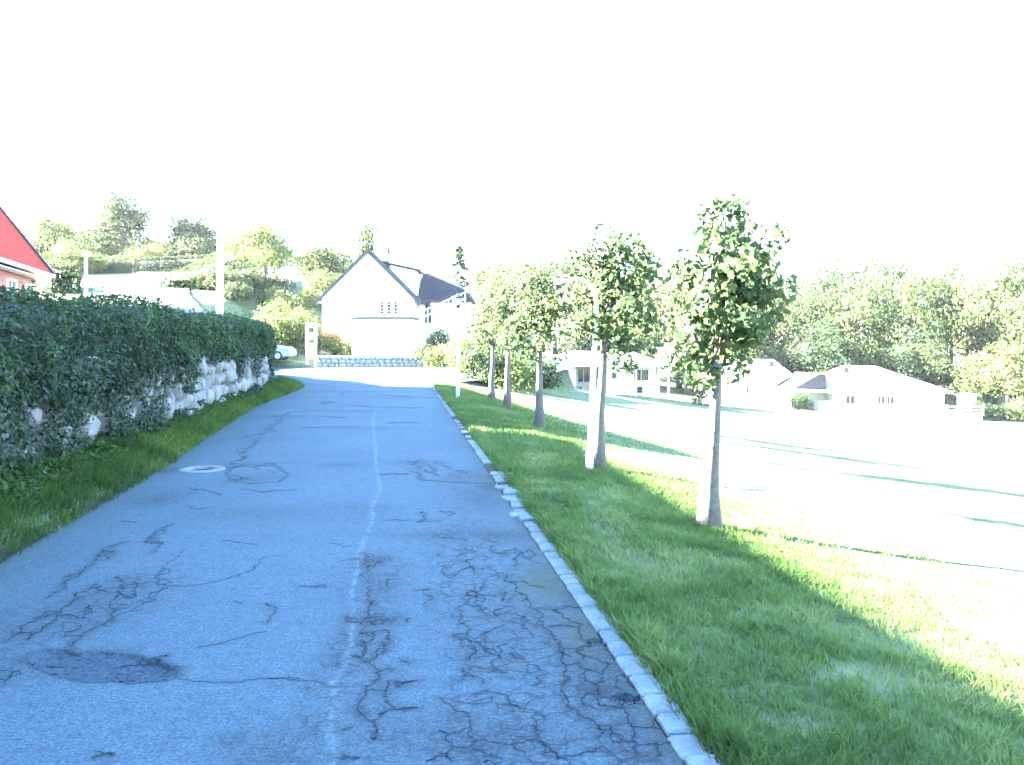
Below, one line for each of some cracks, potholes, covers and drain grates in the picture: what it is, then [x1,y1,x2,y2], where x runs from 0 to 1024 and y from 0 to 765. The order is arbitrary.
crack [194,601,277,649]
crack [402,546,671,764]
crack [8,521,265,647]
crack [340,545,418,759]
crack [176,413,297,509]
pothole [608,690,644,705]
manhole cover [178,465,226,473]
